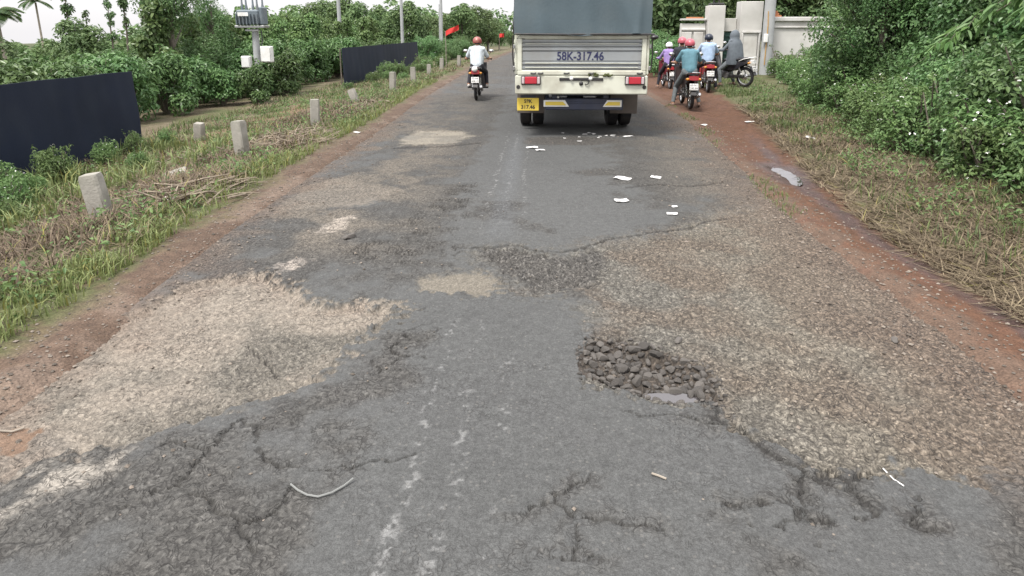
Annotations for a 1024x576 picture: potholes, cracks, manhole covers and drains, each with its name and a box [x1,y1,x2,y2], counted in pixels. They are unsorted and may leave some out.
crack [513,472,665,562]
crack [119,418,416,555]
pothole [577,338,718,405]
crack [623,403,951,552]
